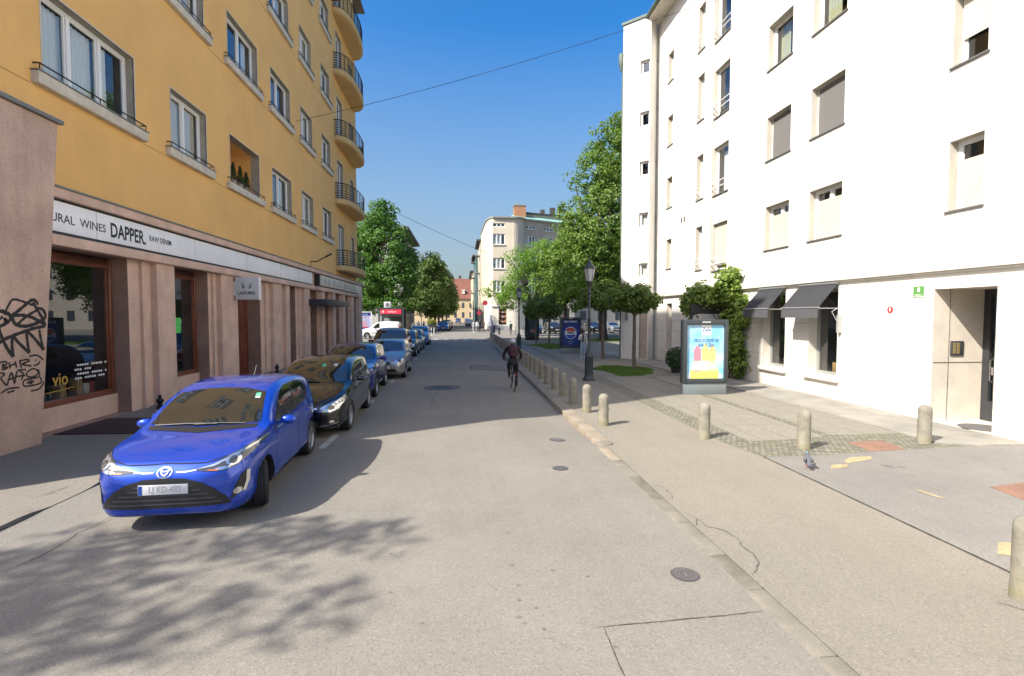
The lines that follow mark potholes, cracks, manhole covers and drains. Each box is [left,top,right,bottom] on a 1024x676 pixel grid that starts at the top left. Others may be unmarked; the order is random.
manhole cover [670,567,700,581]
